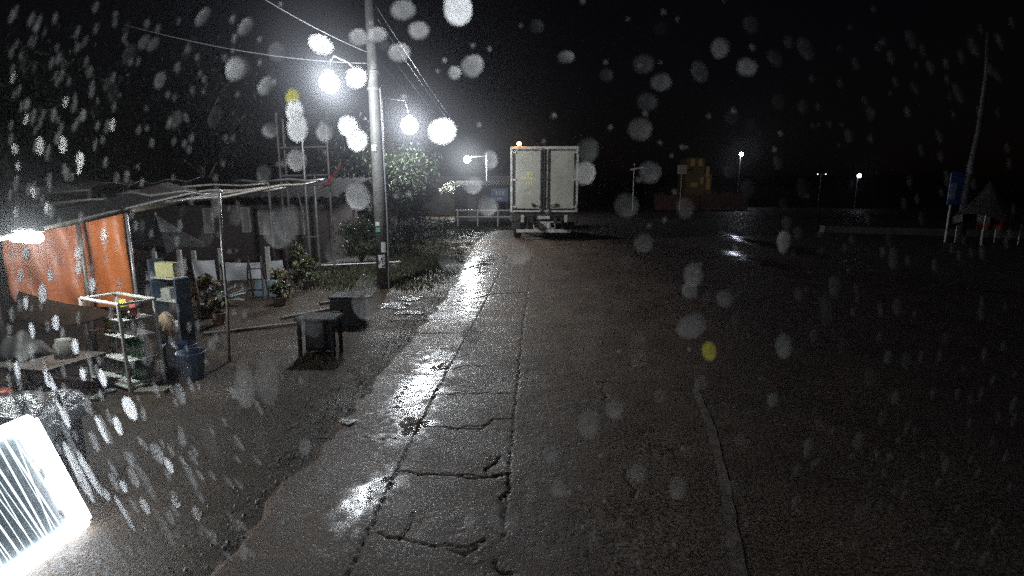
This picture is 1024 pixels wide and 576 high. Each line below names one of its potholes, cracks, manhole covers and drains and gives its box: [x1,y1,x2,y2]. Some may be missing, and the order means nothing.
crack [383,518,511,576]
crack [408,457,511,523]
